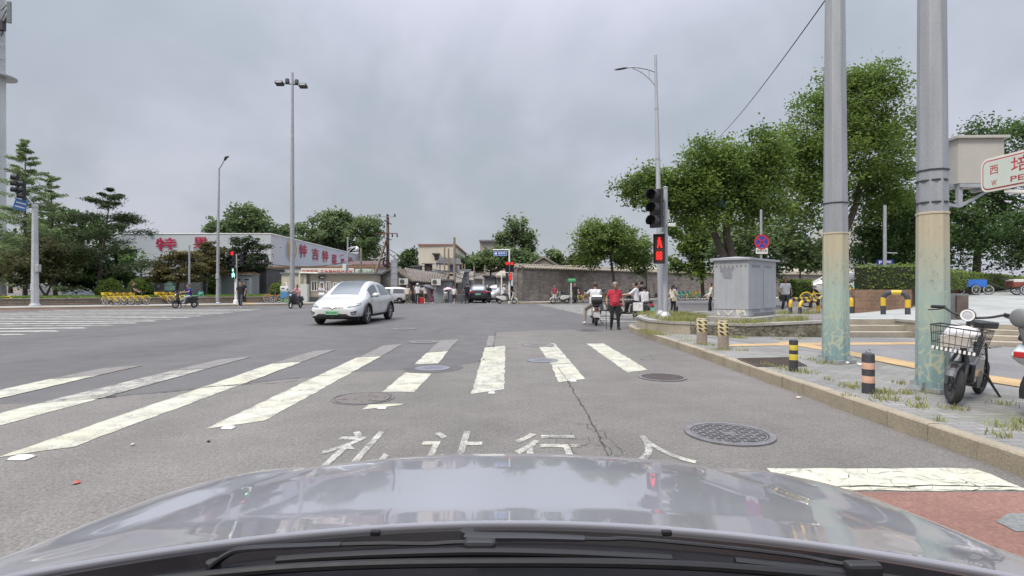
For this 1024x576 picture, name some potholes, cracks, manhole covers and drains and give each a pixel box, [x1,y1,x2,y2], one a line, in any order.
manhole cover [331,392,395,405]
manhole cover [638,373,687,382]
manhole cover [404,364,464,373]
manhole cover [684,422,777,447]
crack [543,423,623,456]
